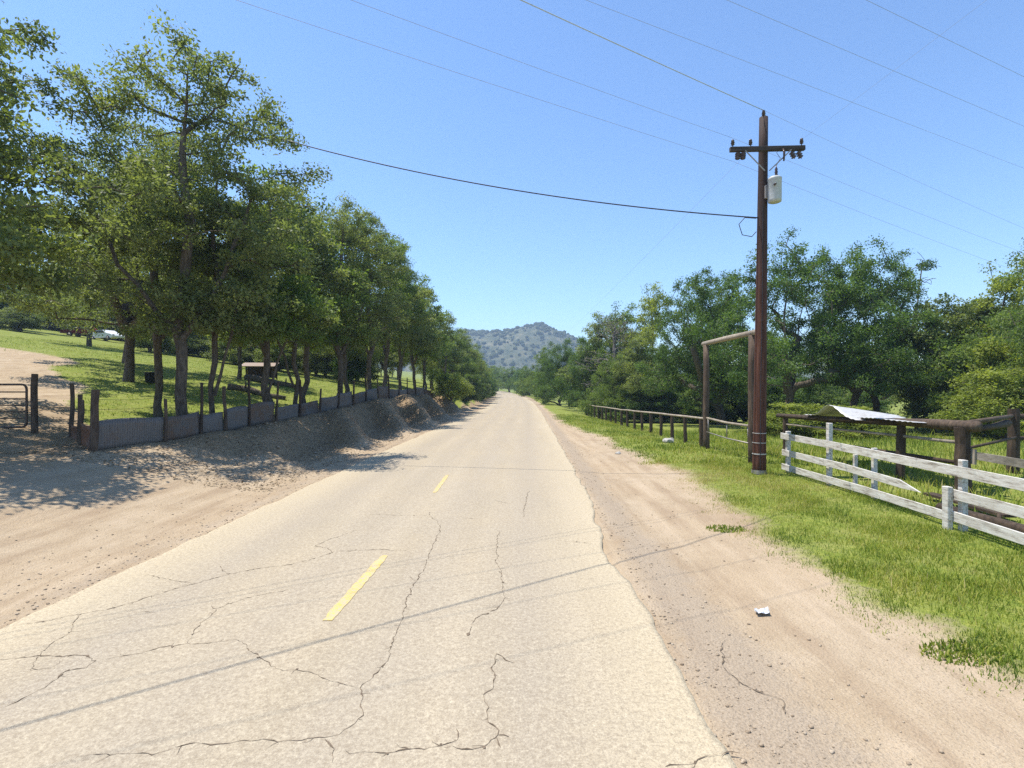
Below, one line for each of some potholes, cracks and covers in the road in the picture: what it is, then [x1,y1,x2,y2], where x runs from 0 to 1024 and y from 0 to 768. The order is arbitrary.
crack [1,534,344,709]
crack [77,512,441,762]
crack [720,642,786,713]
crack [349,653,514,754]
crack [466,534,504,636]
